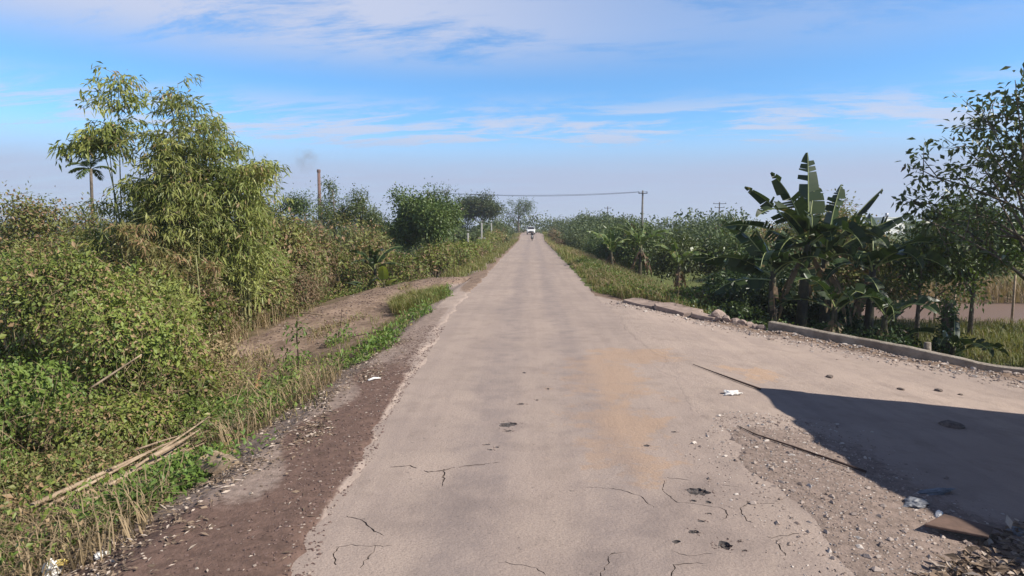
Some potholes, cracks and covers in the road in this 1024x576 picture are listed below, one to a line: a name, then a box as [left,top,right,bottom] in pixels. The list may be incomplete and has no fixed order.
crack [332,516,391,568]
crack [671,550,712,576]
crack [592,477,774,522]
pothole [687,488,711,496]
